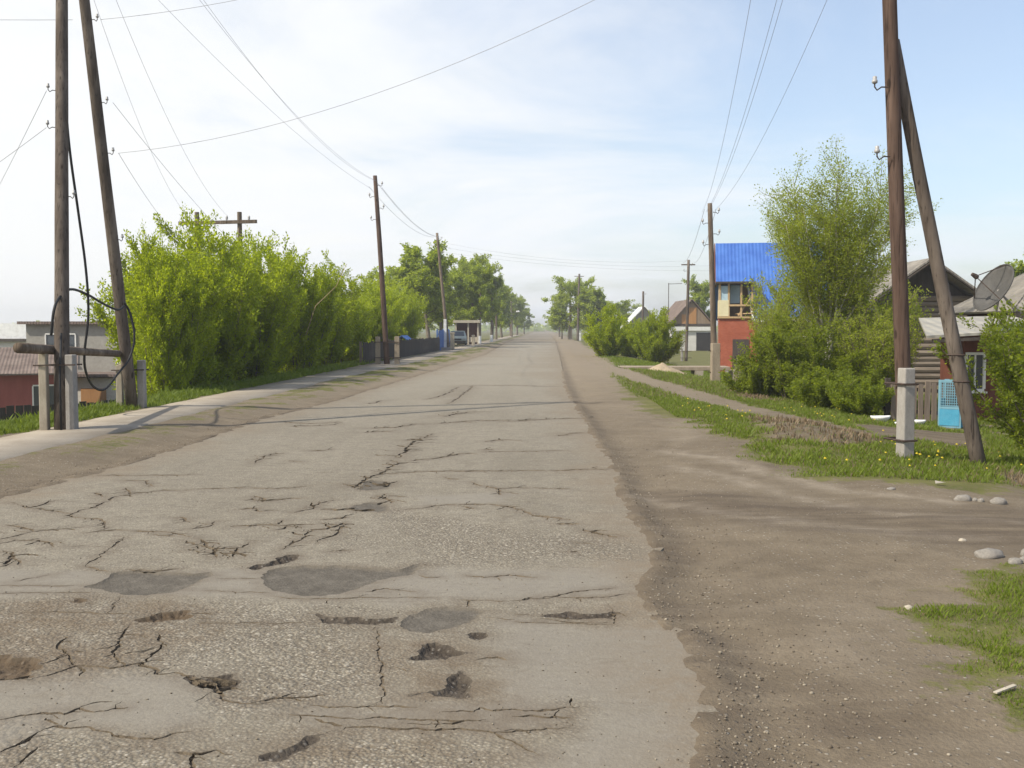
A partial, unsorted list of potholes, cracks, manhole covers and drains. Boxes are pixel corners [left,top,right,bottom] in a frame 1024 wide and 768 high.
crack [366,625,407,707]
crack [367,575,438,592]
pothole [537,611,620,620]
pothole [247,555,300,570]
pothole [134,610,194,623]
pothole [408,671,472,699]
pothole [467,632,488,640]
crack [466,574,624,620]
pothole [258,730,333,762]
pothole [409,642,472,661]
crack [0,385,617,573]
pothole [312,613,399,625]
